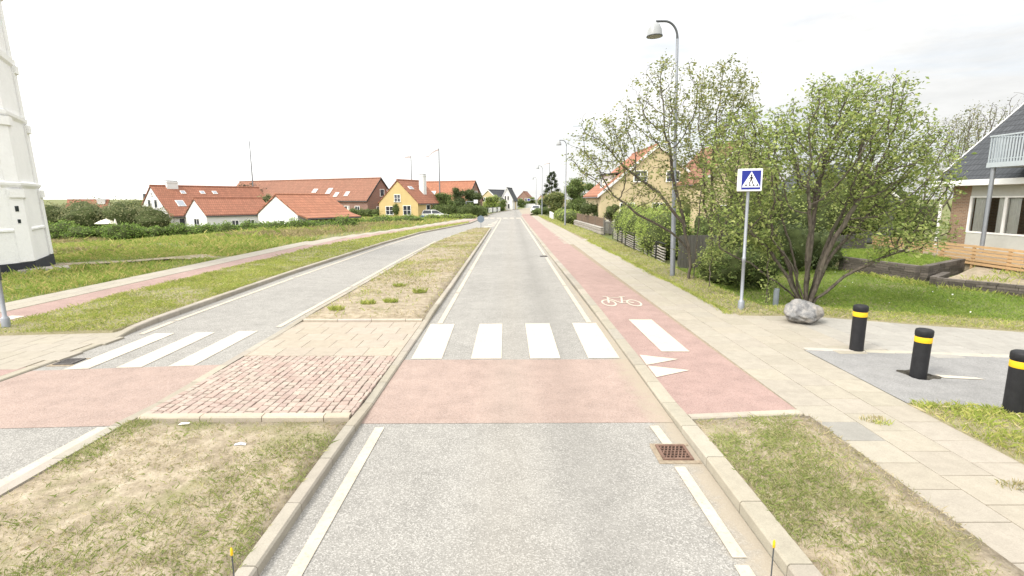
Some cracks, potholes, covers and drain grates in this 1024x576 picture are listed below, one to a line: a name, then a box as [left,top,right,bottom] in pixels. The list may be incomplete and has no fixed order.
drain grate [45,358,91,367]
drain grate [650,444,702,464]
